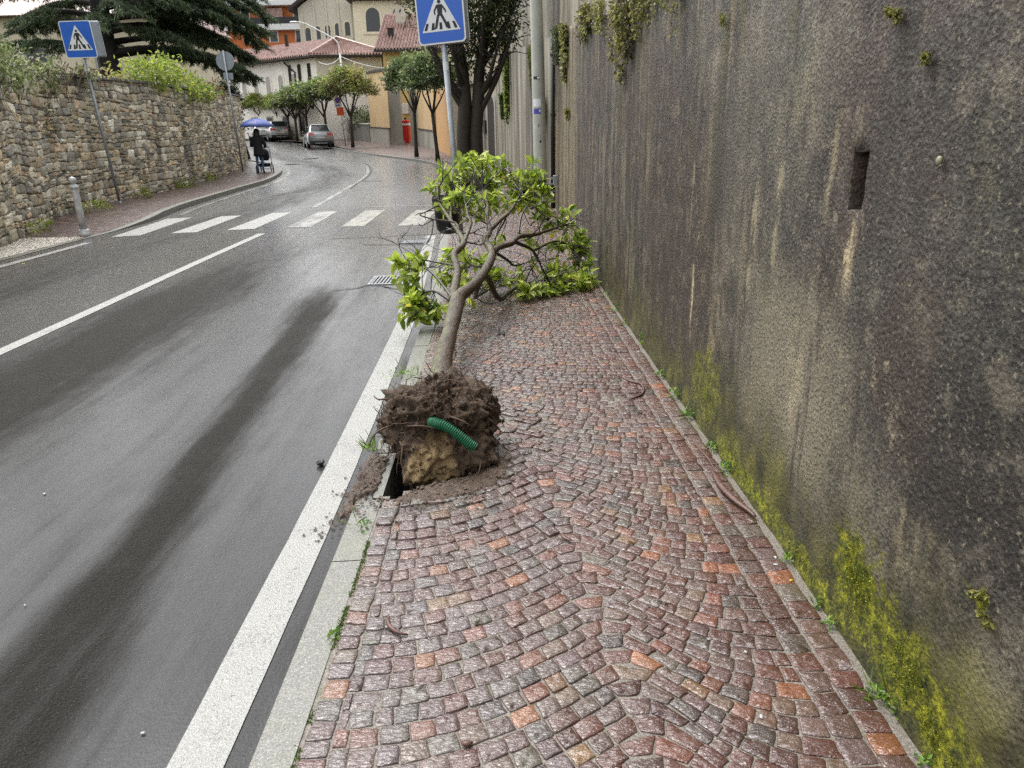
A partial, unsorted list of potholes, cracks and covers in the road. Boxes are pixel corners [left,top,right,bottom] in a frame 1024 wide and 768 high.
drain grate [367,275,404,285]
pothole [372,445,499,500]
